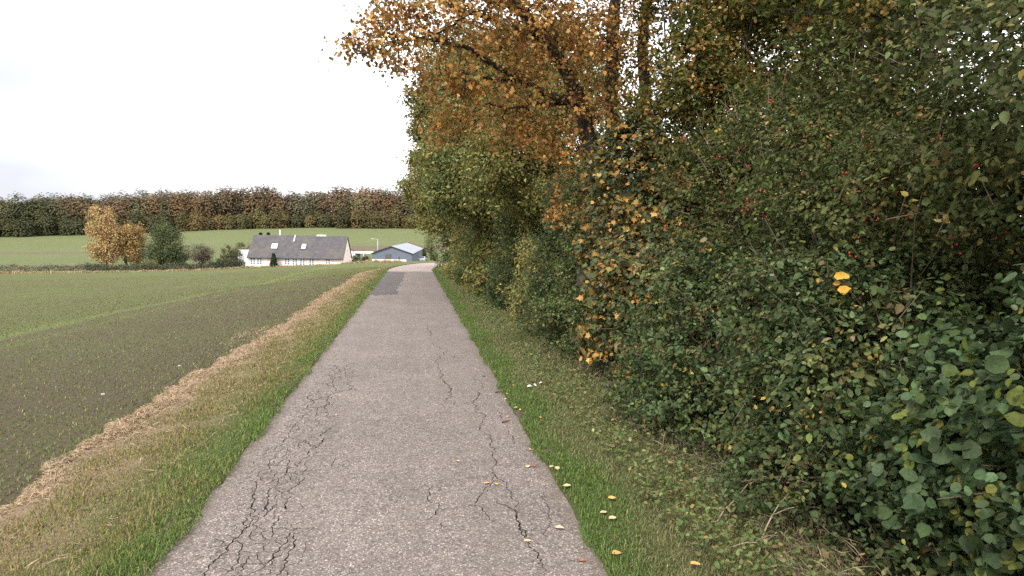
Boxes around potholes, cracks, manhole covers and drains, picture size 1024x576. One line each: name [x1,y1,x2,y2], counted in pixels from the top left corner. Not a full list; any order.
crack [190,362,356,576]
crack [426,328,458,406]
crack [470,380,552,571]
